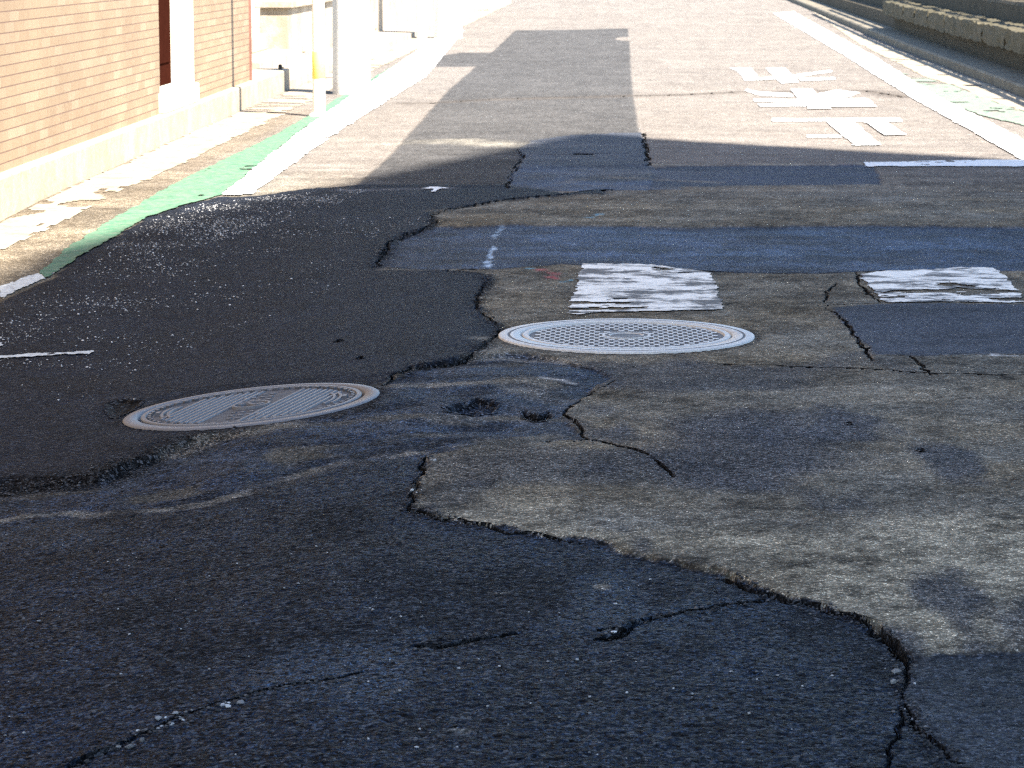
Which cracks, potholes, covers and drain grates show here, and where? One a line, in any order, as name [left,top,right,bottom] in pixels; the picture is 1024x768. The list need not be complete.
crack [417,634,516,649]
pothole [441,397,502,416]
pothole [103,398,145,419]
pothole [518,409,555,423]
manhole cover [123,383,380,431]
crack [546,380,674,477]
crack [597,600,762,642]
crack [700,270,1024,376]
manhole cover [498,318,755,354]
